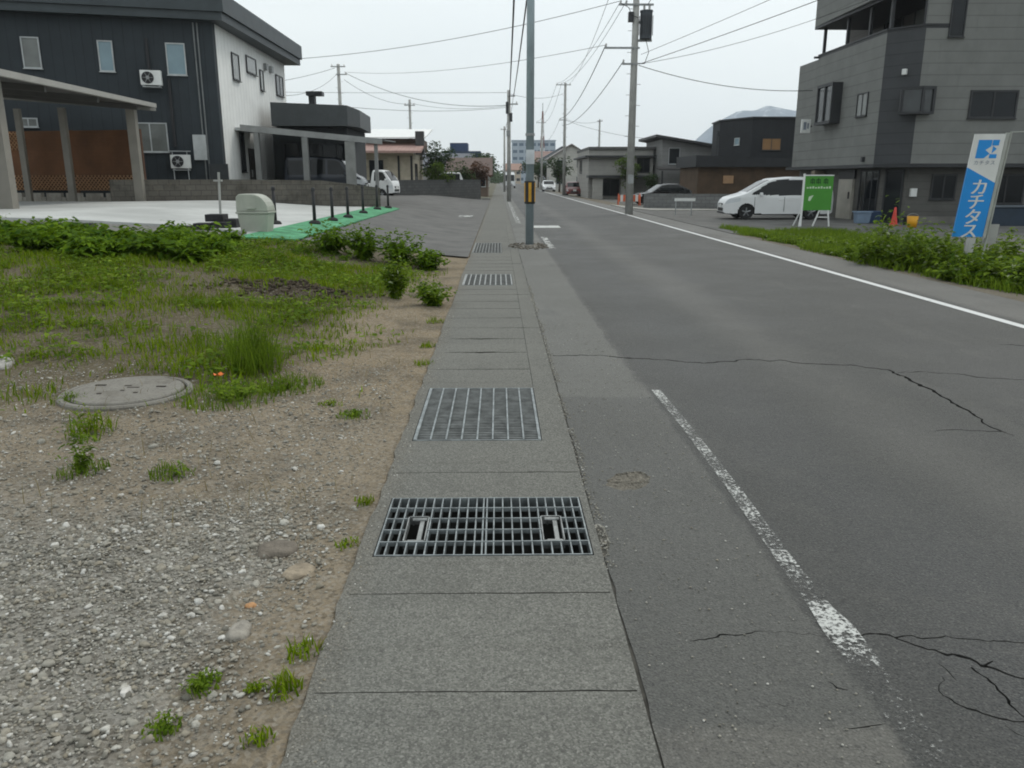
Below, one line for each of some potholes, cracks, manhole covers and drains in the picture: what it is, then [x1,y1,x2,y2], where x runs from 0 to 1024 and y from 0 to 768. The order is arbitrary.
drain grate [374,497,593,557]
drain grate [462,274,513,285]
drain grate [472,243,502,253]
crack [553,355,1022,435]
drain grate [413,388,541,441]
crack [693,631,1024,737]
manhole cover [56,376,195,412]
